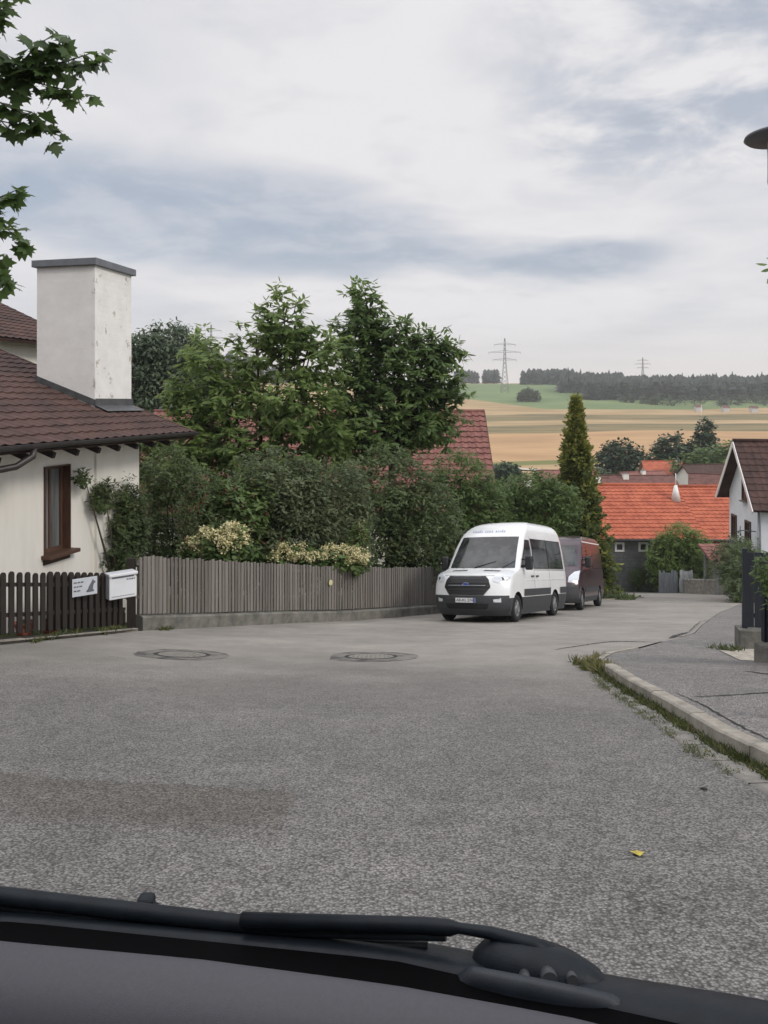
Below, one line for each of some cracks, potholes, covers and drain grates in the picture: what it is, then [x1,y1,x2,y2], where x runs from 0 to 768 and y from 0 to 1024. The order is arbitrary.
manhole cover [133,649,230,660]
manhole cover [330,652,418,662]
